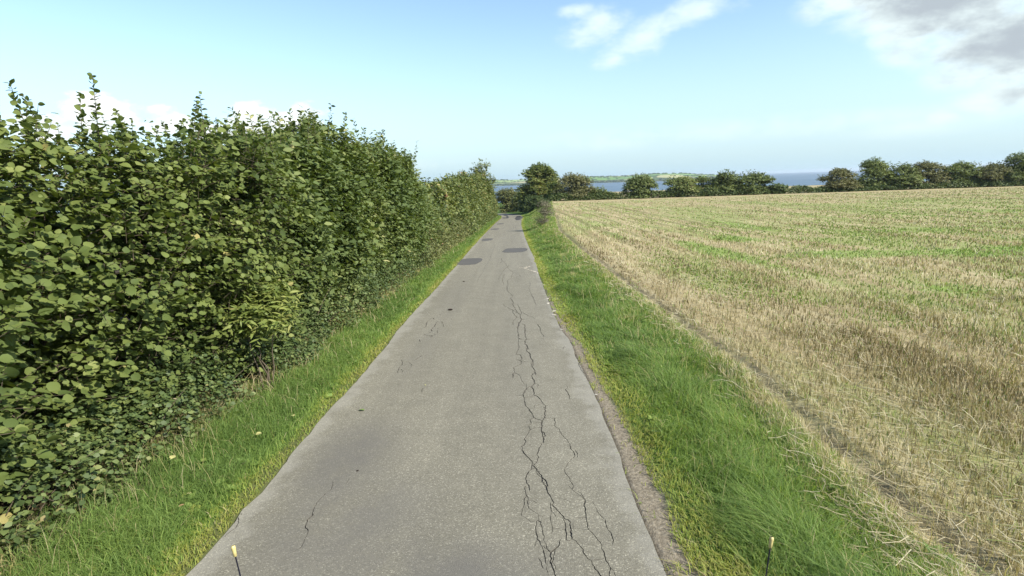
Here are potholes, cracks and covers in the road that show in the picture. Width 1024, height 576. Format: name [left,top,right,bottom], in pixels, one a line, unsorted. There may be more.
crack [501,259,616,576]
